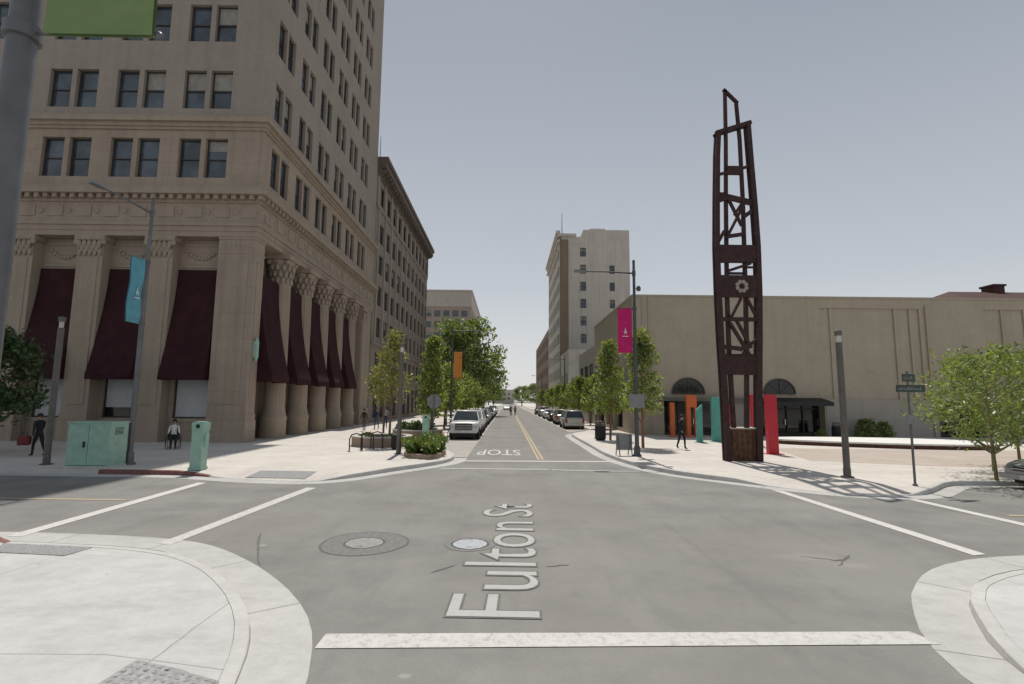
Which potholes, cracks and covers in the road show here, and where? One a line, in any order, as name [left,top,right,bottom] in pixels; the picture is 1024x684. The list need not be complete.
manhole cover [444,537,496,551]
manhole cover [318,532,410,556]
